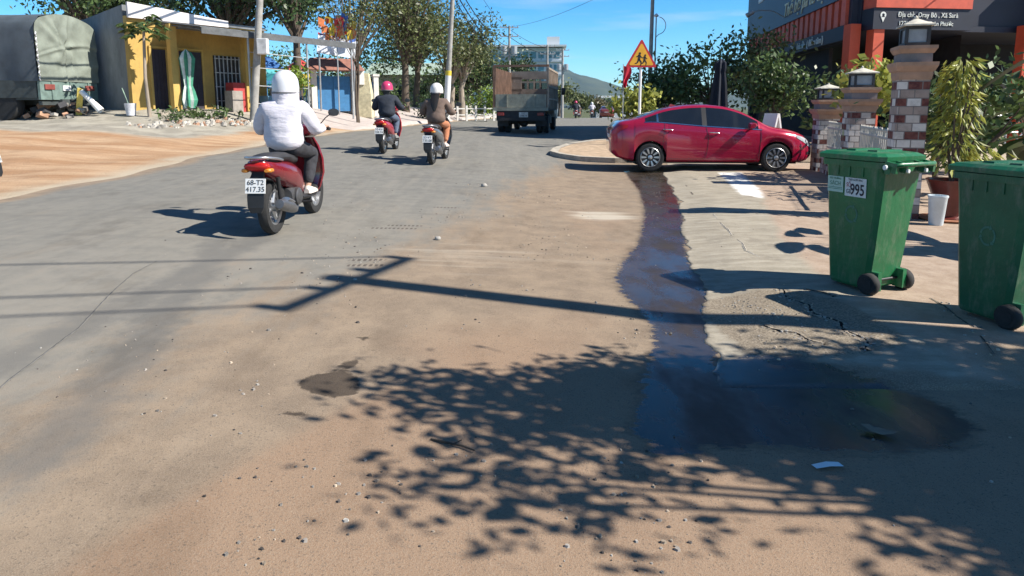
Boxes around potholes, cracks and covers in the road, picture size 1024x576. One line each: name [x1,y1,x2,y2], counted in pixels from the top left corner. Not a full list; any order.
crack [759,288,873,351]
crack [713,214,762,258]
